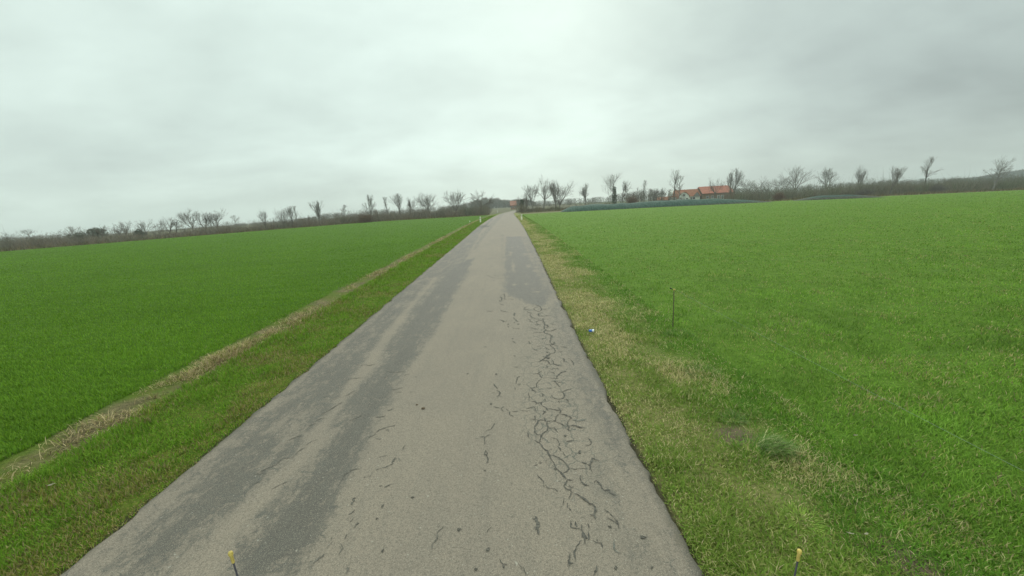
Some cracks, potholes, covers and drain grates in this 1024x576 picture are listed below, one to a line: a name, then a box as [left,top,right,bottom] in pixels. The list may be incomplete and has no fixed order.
crack [481,275,619,566]
crack [313,510,354,574]
